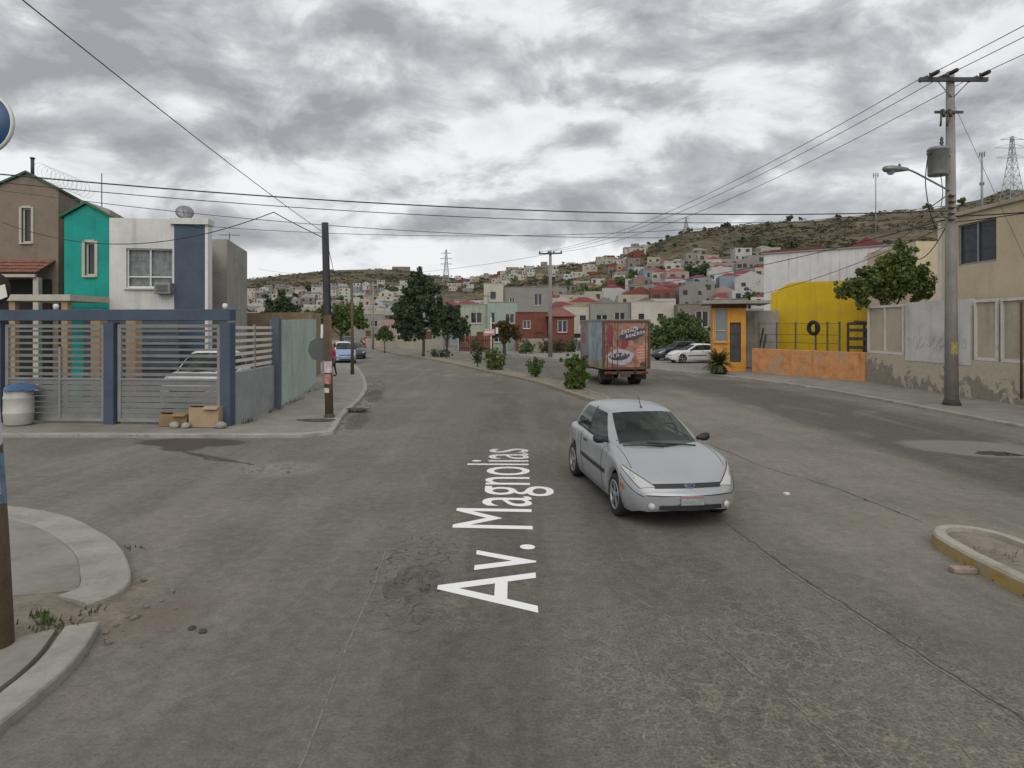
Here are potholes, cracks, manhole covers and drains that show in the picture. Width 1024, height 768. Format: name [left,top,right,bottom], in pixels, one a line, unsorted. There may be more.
pothole [241,464,314,475]
crack [364,536,458,632]
